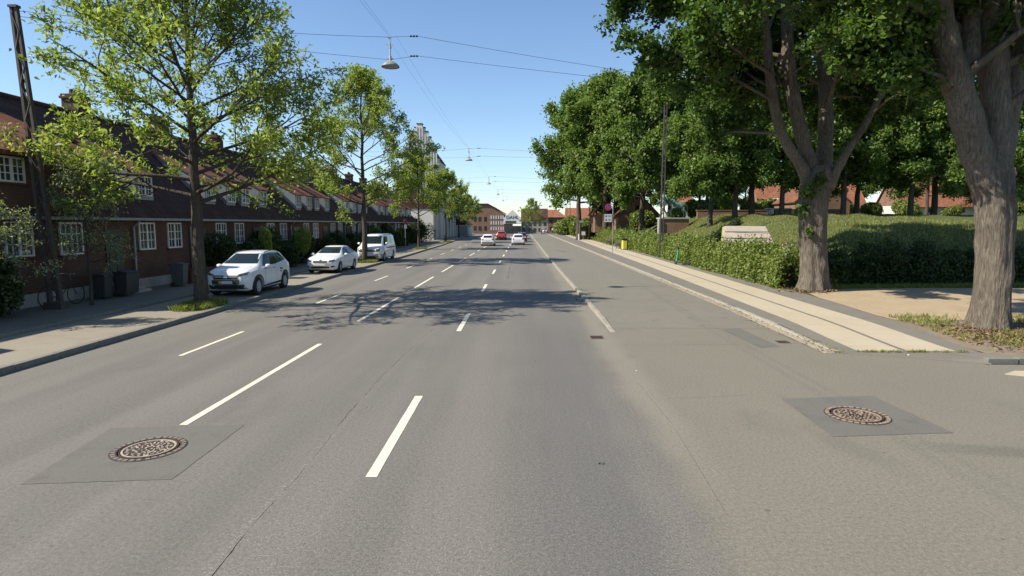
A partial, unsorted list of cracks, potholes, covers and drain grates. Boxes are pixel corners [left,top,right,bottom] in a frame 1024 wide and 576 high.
manhole cover [823,406,892,425]
manhole cover [108,436,188,462]
